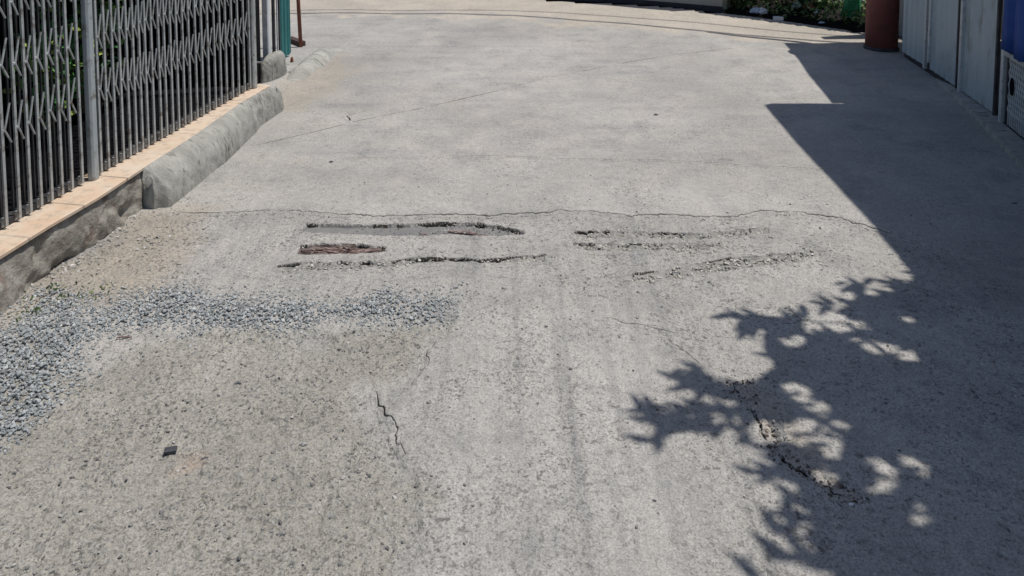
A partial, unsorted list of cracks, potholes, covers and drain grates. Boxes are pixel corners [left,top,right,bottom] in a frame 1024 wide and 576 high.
crack [175,207,893,237]
pothole [567,223,779,246]
crack [602,315,706,367]
pothole [564,237,731,257]
crack [369,338,444,460]
pothole [286,239,397,259]
pothole [604,246,842,289]
pothole [293,219,534,240]
pothole [263,250,555,277]
crack [725,380,871,520]
